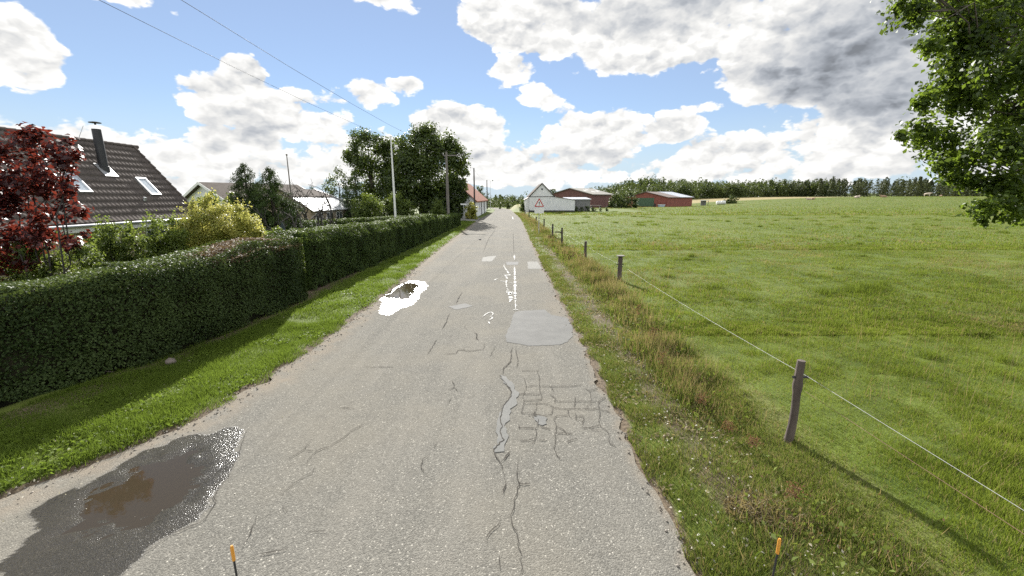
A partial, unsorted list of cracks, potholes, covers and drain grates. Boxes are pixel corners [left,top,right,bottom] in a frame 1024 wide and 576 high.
crack [449,333,613,572]
crack [283,407,371,507]
